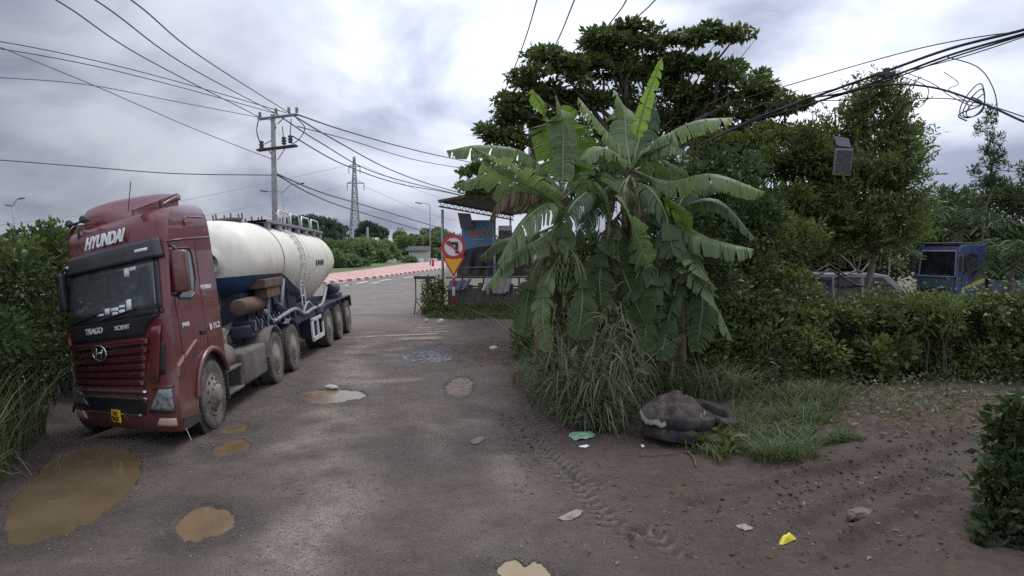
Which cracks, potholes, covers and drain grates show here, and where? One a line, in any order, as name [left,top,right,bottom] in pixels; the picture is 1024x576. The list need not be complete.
pothole [215,420,255,436]
pothole [205,436,260,460]
pothole [0,441,149,551]
pothole [485,553,566,576]
pothole [442,375,476,399]
pothole [293,387,372,405]
pothole [165,499,243,548]
